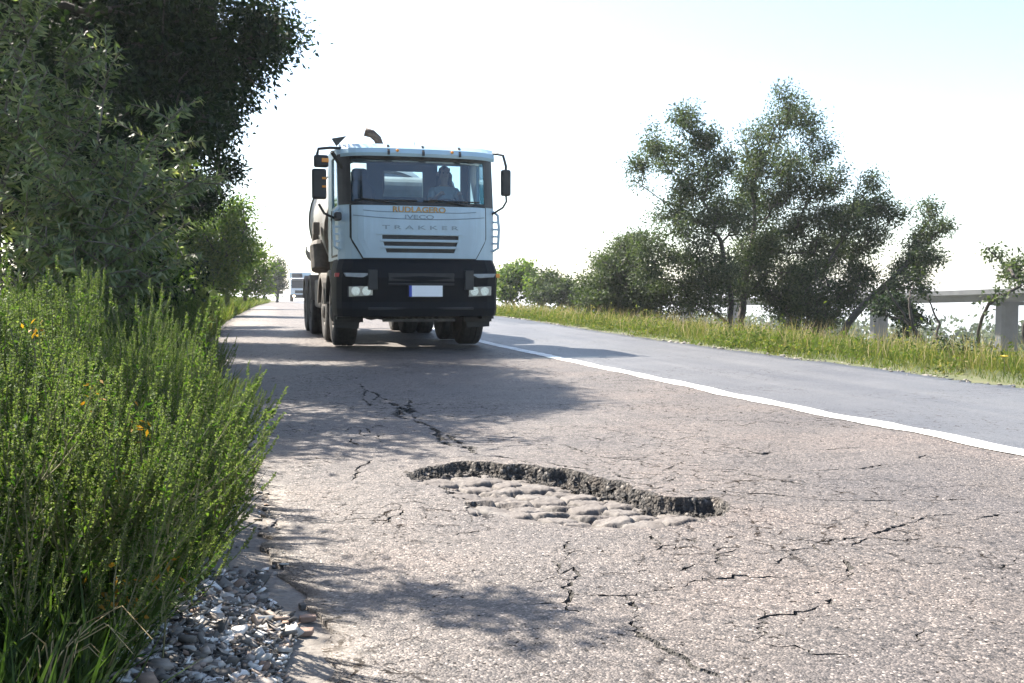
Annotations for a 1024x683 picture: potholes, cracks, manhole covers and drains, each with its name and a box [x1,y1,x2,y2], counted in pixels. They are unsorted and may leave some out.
pothole [403,461,731,530]
crack [506,447,1024,681]
crack [345,384,691,489]
